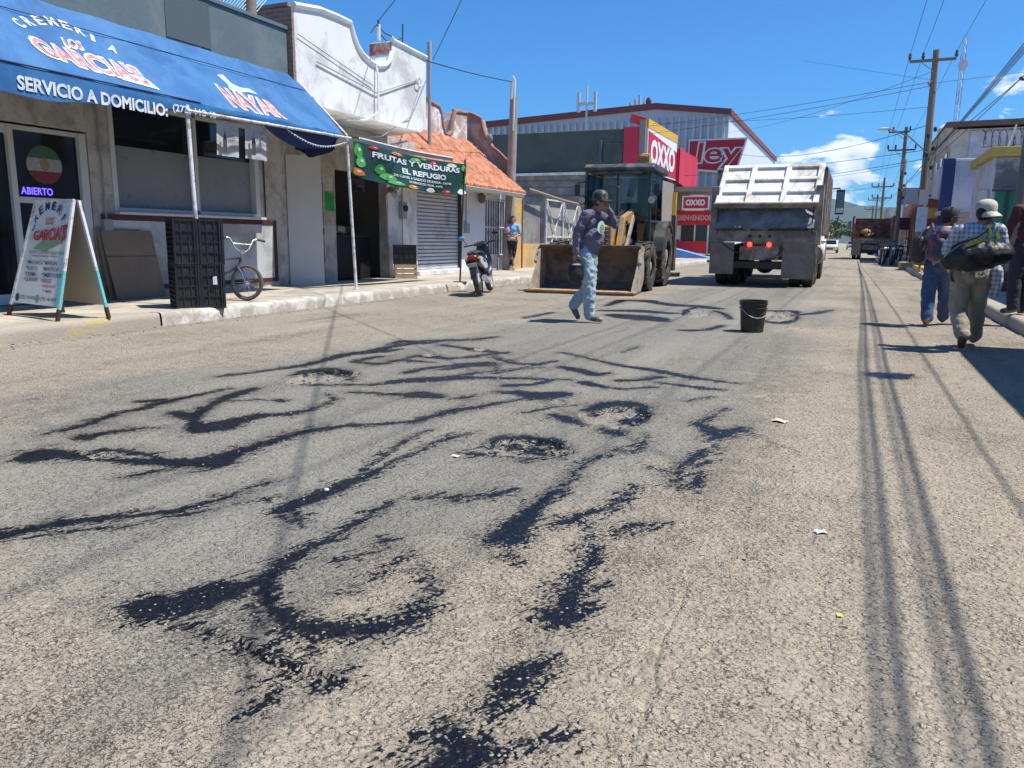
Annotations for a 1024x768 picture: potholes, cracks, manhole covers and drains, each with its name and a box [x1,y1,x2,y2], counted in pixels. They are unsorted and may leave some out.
crack [617,551,757,767]
pothole [571,404,661,433]
pothole [278,369,372,387]
pothole [674,309,718,319]
pothole [476,437,586,461]
pothole [765,310,803,324]
